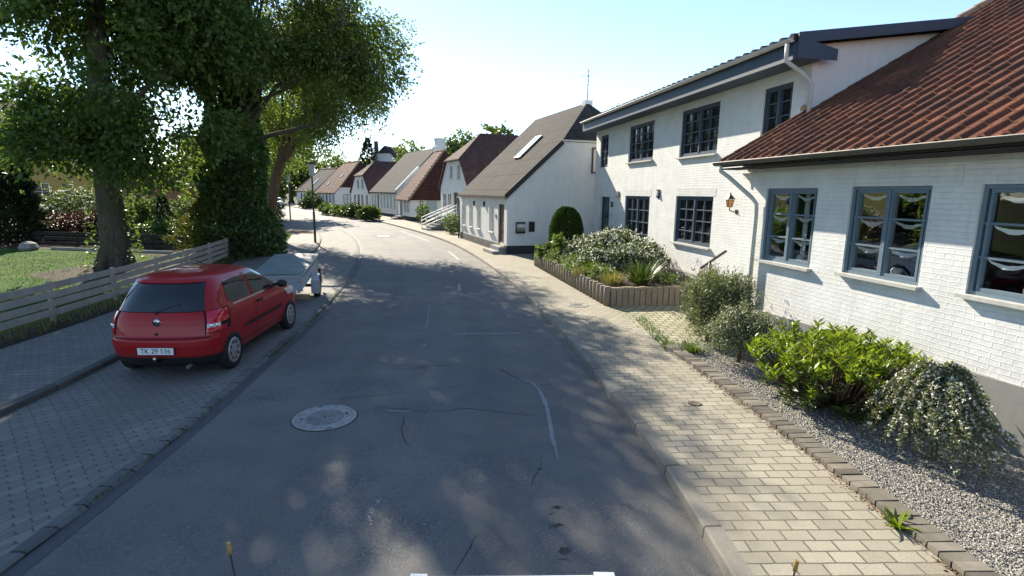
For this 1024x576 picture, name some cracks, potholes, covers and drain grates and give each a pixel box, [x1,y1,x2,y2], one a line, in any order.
crack [336,392,537,446]
manhole cover [290,405,358,432]
